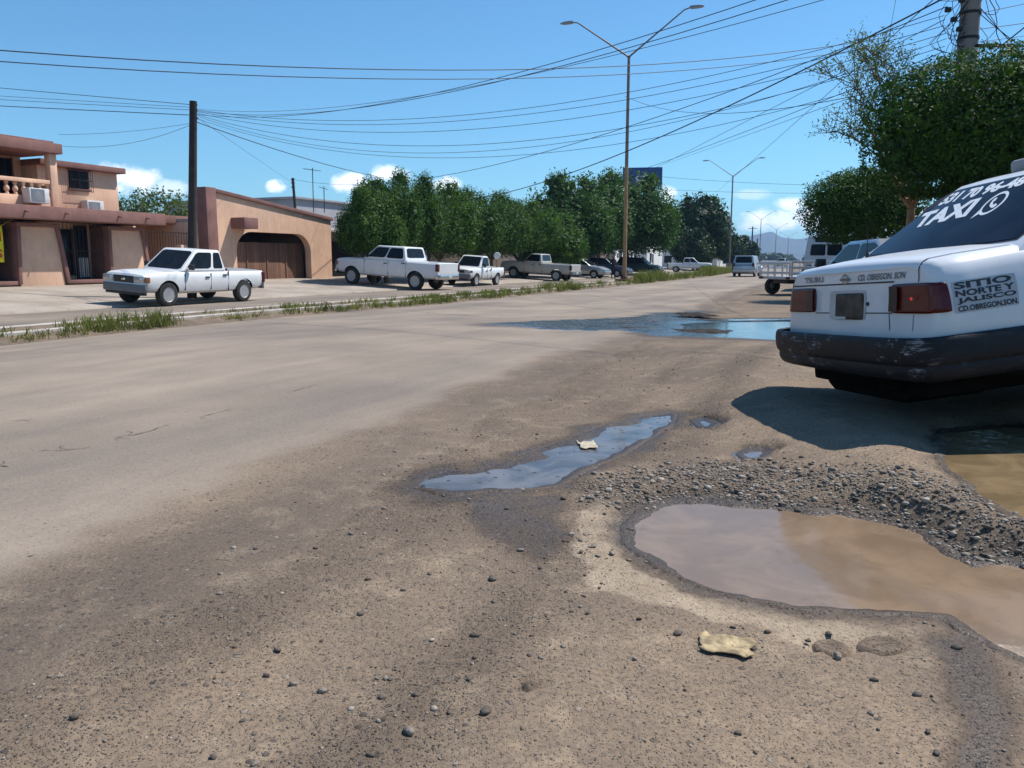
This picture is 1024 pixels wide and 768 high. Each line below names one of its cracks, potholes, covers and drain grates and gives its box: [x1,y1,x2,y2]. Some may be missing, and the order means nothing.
pothole [931,423,1024,523]
pothole [418,413,677,498]
pothole [689,418,721,429]
pothole [656,318,791,341]
pothole [731,443,779,460]
pothole [619,496,1024,660]
